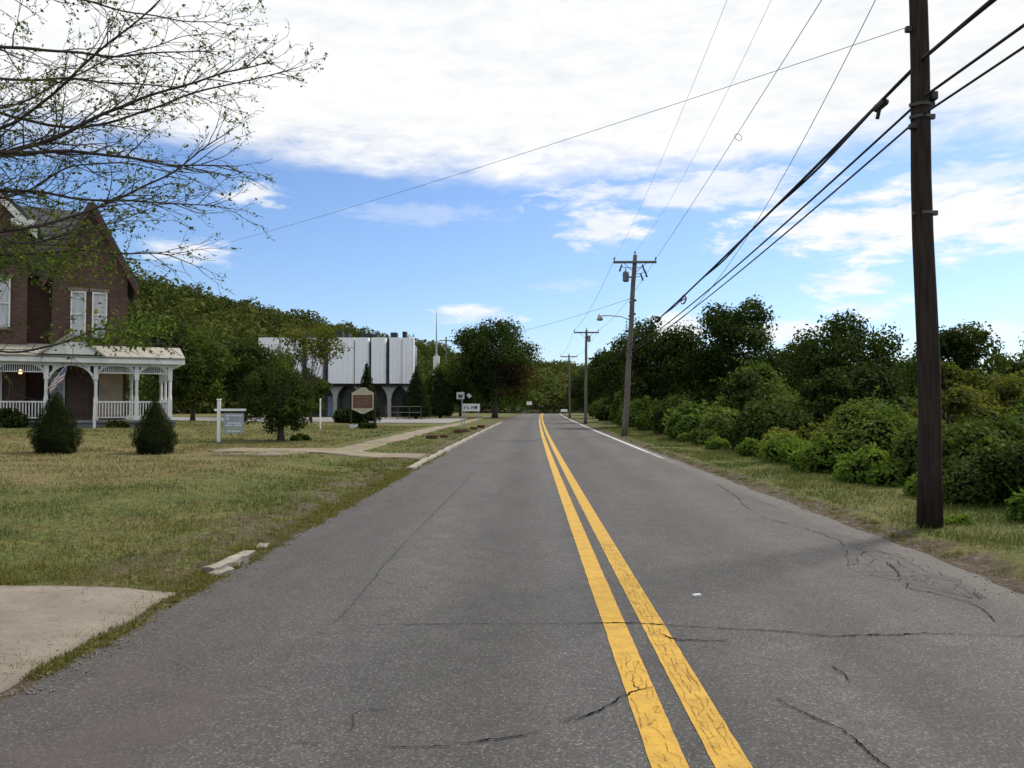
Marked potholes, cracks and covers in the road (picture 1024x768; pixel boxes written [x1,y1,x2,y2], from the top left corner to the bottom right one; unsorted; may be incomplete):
crack [350,541,1023,768]
crack [716,483,995,621]
